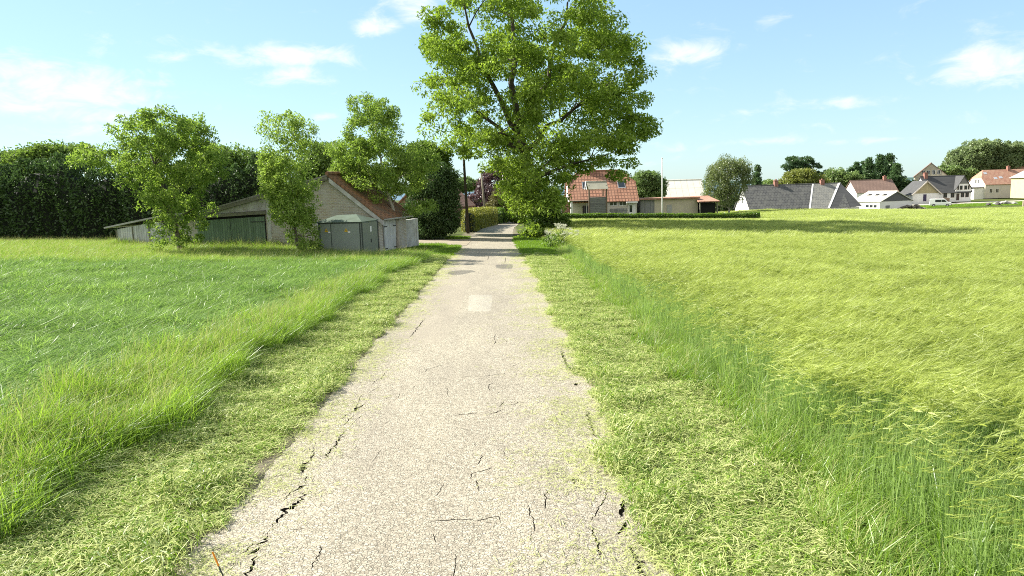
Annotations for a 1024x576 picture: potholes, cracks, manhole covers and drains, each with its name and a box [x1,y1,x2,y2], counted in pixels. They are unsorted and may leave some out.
crack [453,336,552,416]
crack [572,411,626,557]
crack [228,373,385,576]
crack [528,490,548,540]
crack [432,516,500,542]
